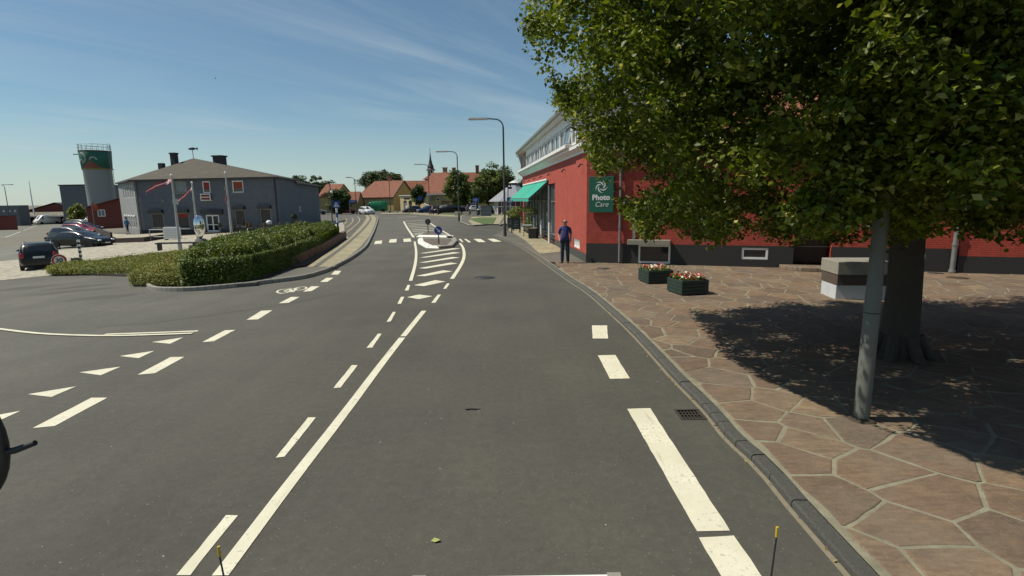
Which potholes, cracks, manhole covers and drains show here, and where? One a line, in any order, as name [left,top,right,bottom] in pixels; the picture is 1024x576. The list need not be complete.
drain grate [673,409,708,420]
